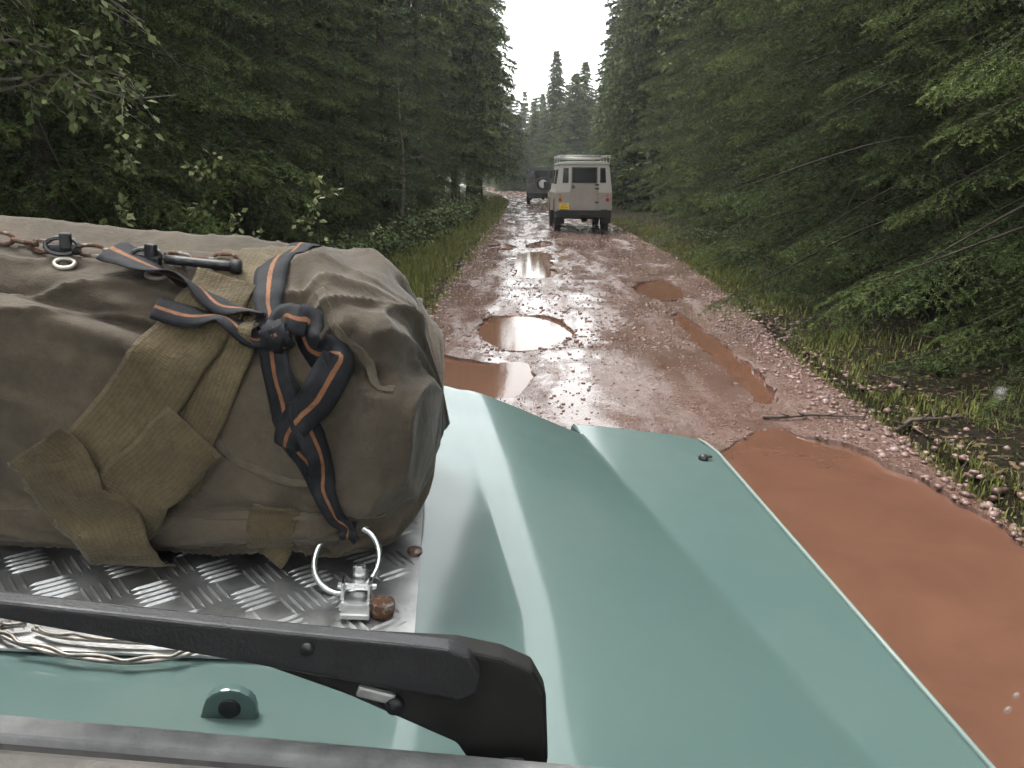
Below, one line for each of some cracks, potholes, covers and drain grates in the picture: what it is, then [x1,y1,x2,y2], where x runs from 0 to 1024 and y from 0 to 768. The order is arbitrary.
pothole [719,427,1024,768]
pothole [444,354,537,399]
pothole [476,315,575,352]
pothole [671,313,779,404]
pothole [631,278,686,301]
pothole [510,251,558,279]
